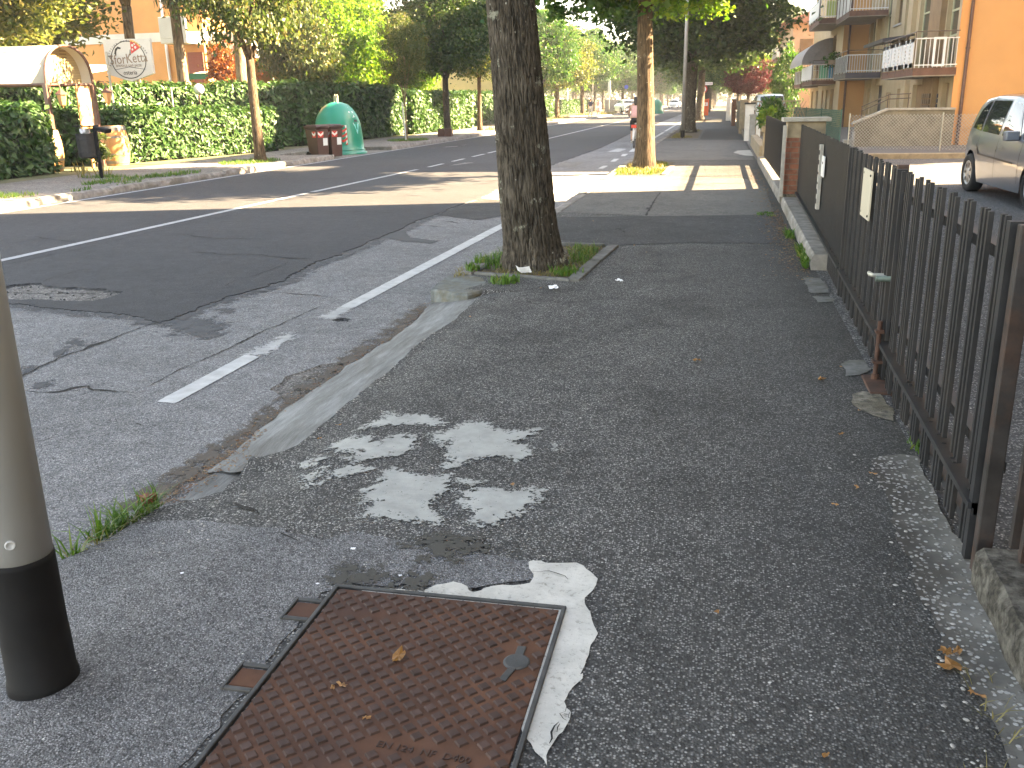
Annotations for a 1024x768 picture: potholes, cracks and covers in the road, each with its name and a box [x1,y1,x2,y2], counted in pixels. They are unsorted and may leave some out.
crack [22,322,158,395]
manhole cover [190,584,567,768]
pothole [6,283,123,301]
